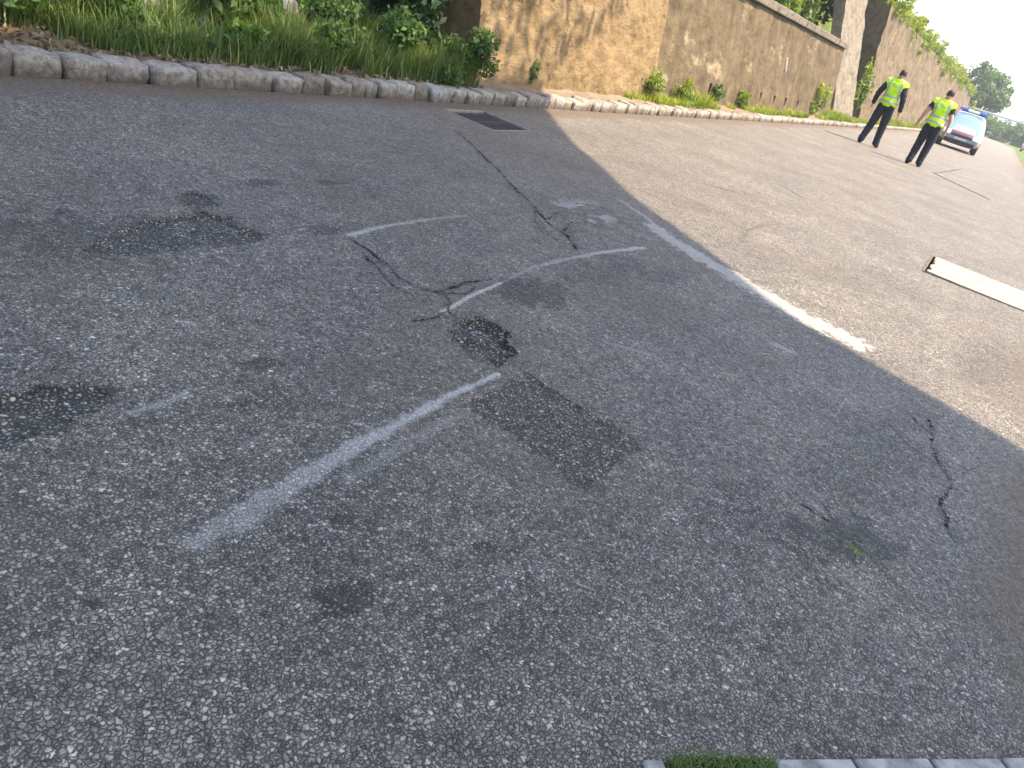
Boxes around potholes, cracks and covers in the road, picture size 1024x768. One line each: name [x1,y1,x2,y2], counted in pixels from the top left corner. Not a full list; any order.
pothole [446,315,518,367]
crack [352,240,492,322]
crack [891,411,959,544]
drain grate [444,109,532,131]
crack [457,132,611,251]
